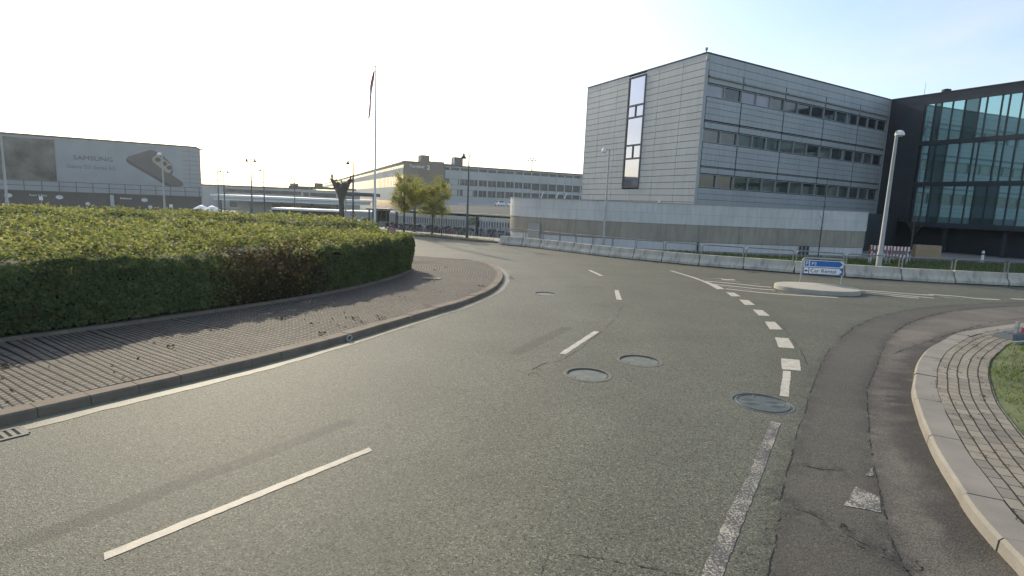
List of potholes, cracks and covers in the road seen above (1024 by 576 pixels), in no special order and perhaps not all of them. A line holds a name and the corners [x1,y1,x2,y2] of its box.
manhole cover [617,354,664,367]
crack [779,302,1024,575]
manhole cover [564,367,613,382]
drain grate [0,426,31,442]
crack [540,551,686,576]
manhole cover [731,393,796,414]
